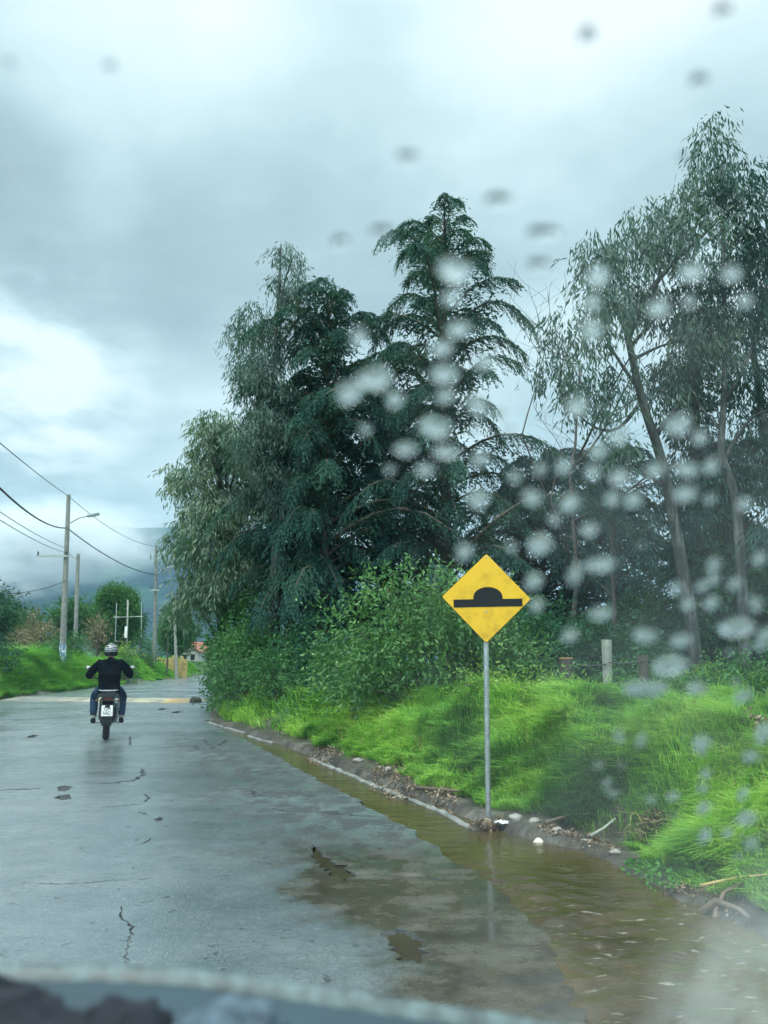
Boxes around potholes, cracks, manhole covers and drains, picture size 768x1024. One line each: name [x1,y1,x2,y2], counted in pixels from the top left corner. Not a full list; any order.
crack [0,768,151,814]
crack [119,896,170,965]
crack [192,739,239,752]
pothole [307,843,357,882]
pothole [381,927,429,964]
